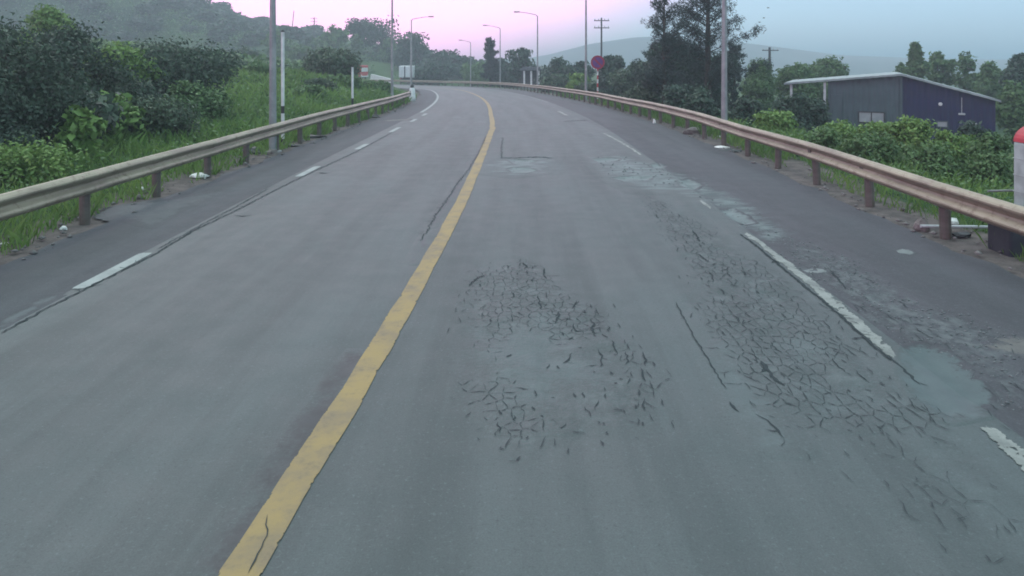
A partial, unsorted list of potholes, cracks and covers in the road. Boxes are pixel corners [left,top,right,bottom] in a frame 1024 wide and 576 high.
crack [249,518,269,571]
crack [447,259,674,461]
crack [639,192,1023,566]
crack [420,136,549,241]
